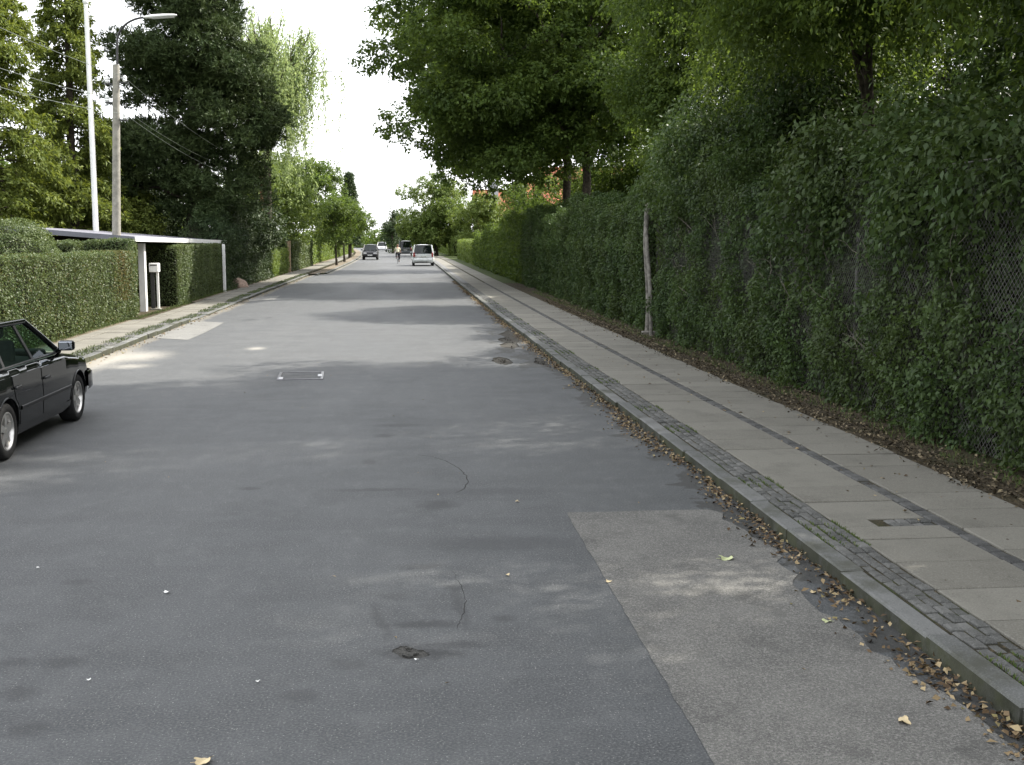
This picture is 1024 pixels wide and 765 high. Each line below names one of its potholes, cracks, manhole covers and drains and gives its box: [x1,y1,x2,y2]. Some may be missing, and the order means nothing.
manhole cover [276,371,324,380]
pothole [491,357,513,365]
pothole [392,646,431,659]
